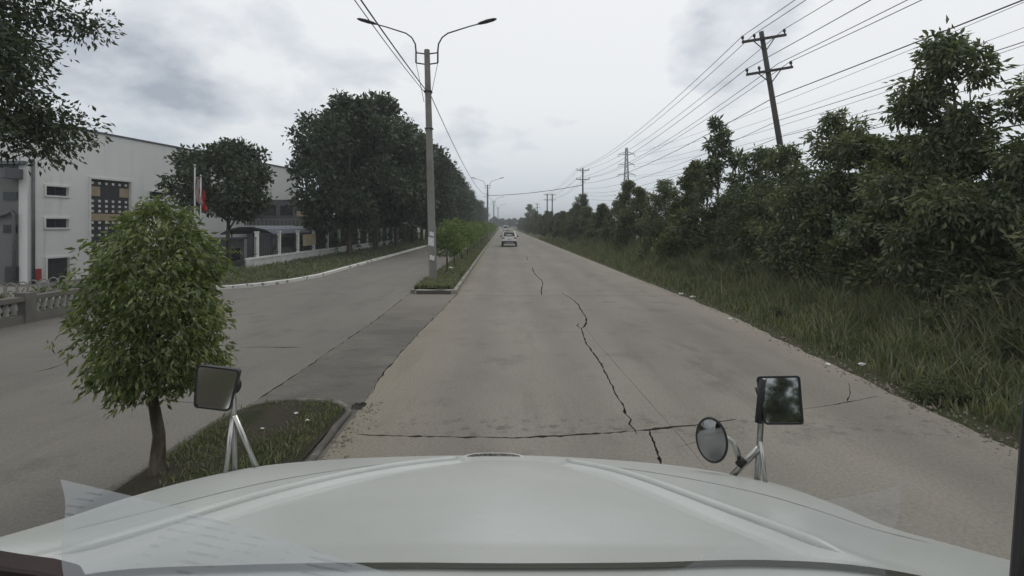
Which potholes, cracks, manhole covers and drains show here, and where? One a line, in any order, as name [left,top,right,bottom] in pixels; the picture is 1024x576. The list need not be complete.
crack [562,293,736,465]
